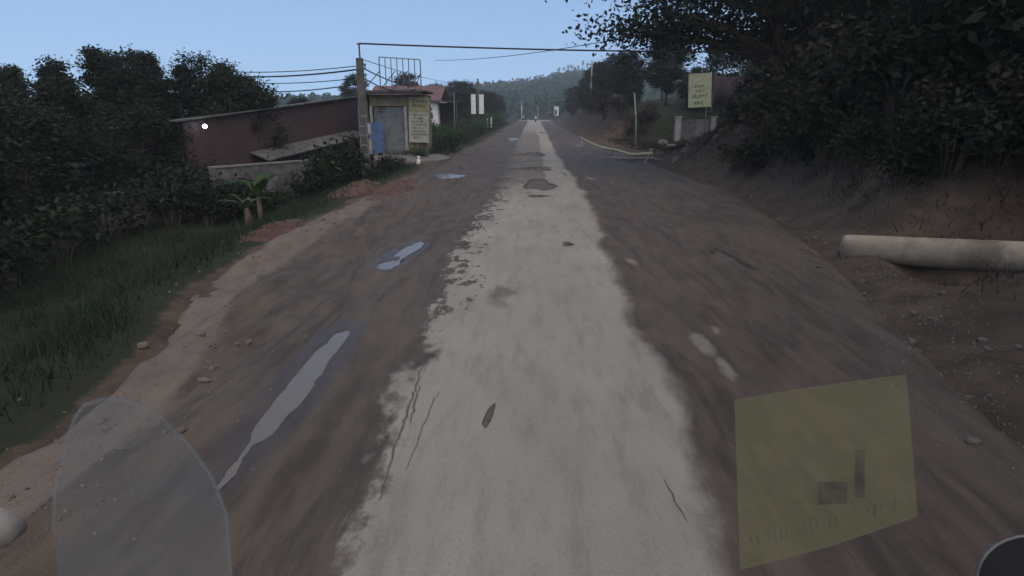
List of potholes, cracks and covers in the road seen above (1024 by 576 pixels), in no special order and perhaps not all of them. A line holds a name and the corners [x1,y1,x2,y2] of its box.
pothole [482,403,496,428]
pothole [523,178,559,191]
crack [379,363,439,500]
